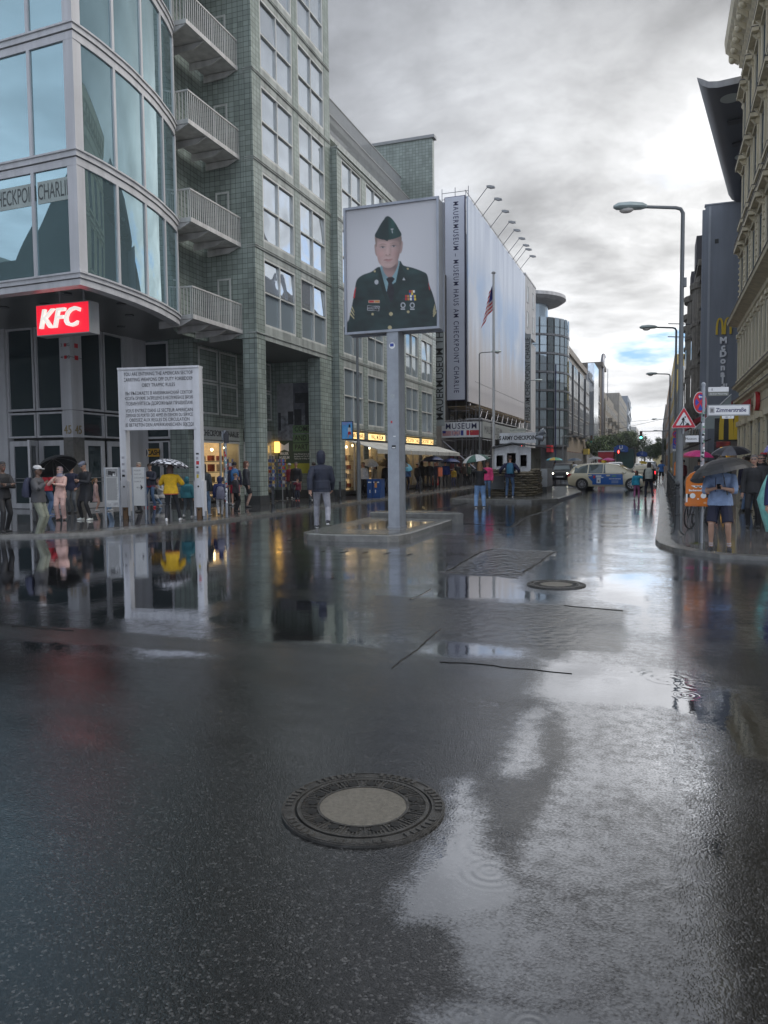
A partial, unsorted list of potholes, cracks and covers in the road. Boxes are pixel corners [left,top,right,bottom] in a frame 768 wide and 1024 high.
manhole cover [281,773,445,848]
manhole cover [527,579,586,590]
